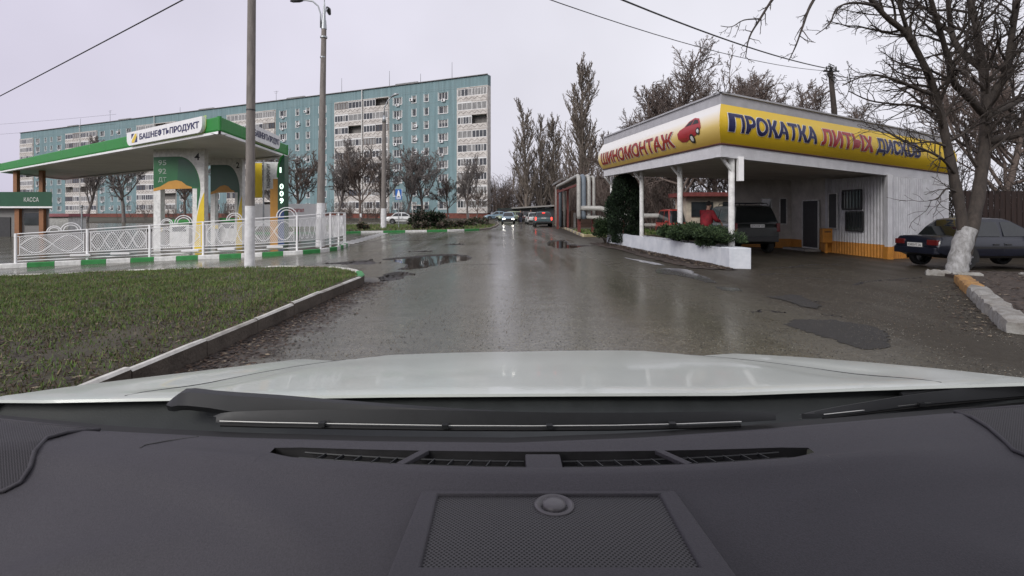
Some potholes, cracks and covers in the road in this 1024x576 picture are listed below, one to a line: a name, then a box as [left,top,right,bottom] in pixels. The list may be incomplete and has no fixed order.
pothole [377,271,415,282]
pothole [382,254,473,270]
